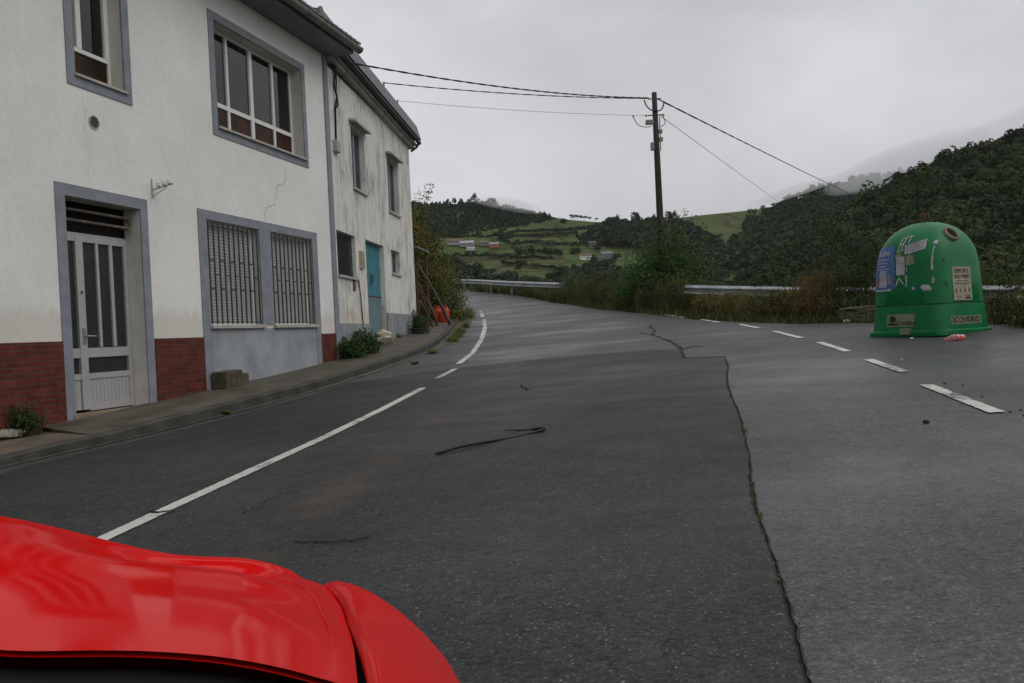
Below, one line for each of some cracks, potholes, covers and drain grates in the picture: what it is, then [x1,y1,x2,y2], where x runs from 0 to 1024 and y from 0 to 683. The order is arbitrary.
crack [640,325,813,683]
crack [294,536,372,544]
crack [243,491,298,513]
